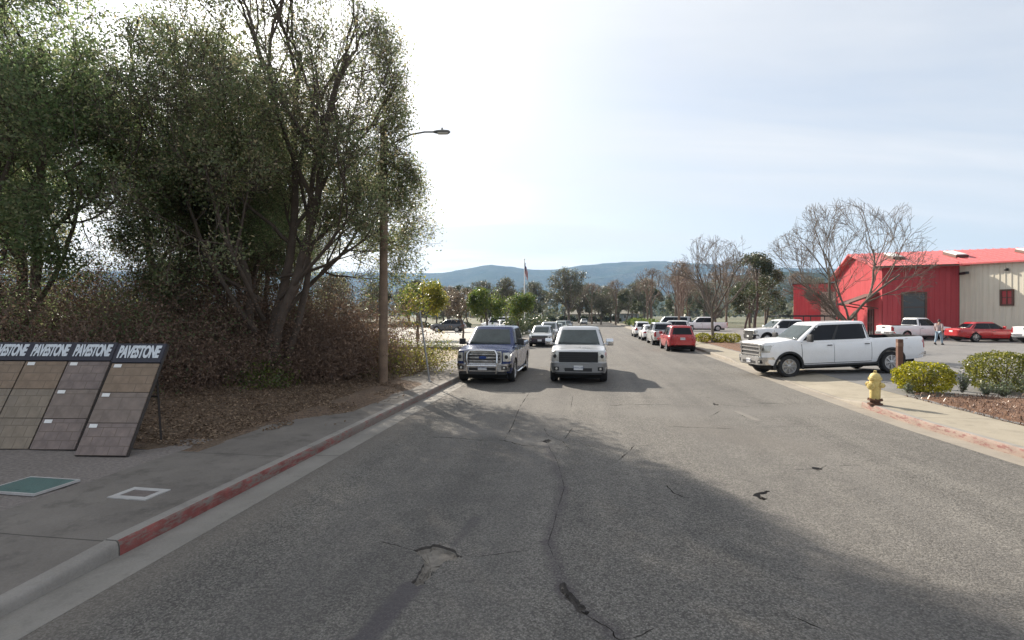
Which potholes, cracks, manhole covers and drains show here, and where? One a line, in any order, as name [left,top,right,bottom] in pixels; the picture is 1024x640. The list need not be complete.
pothole [411,543,462,586]
utility cover [0,476,80,496]
crack [544,426,655,640]
